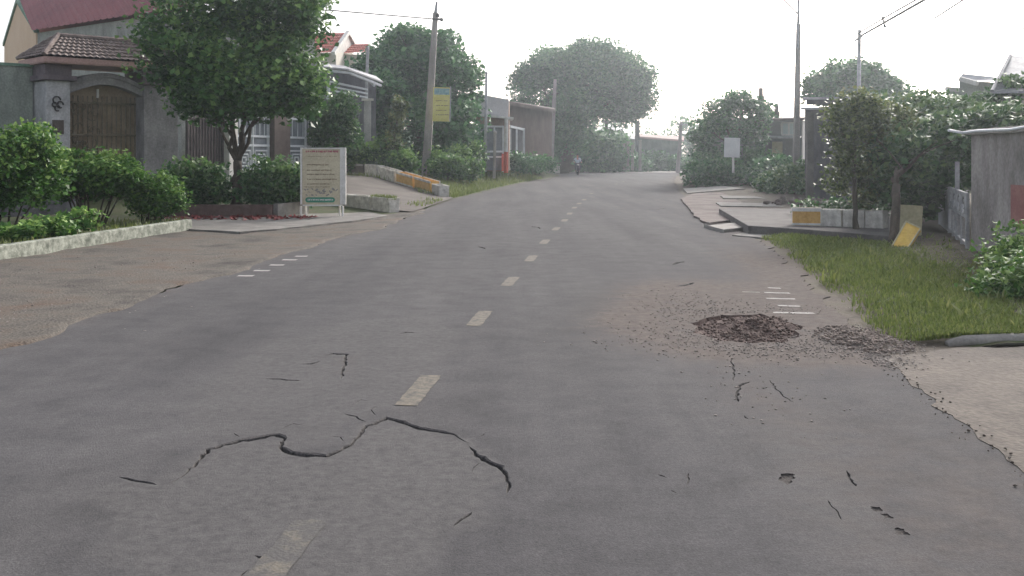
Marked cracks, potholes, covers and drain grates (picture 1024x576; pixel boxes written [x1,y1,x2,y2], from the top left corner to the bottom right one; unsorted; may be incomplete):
pothole [692,313,803,343]
crack [828,470,857,520]
crack [265,353,349,381]
crack [120,400,512,494]
crack [730,360,749,419]
